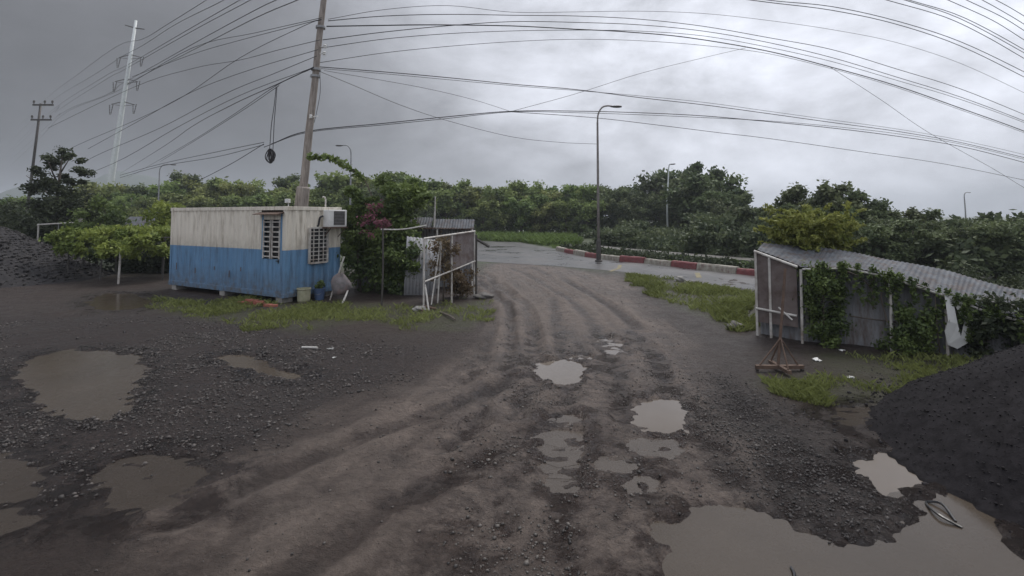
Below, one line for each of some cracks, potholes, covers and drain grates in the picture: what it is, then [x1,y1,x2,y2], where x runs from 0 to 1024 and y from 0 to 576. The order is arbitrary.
pothole [602,346,633,355]
pothole [527,353,596,387]
pothole [617,469,671,495]
pothole [592,334,630,348]
pothole [525,424,595,448]
pothole [531,466,593,497]
pothole [625,395,698,437]
pothole [622,434,689,460]
pothole [523,438,600,468]
pothole [537,406,591,431]
pothole [583,447,647,476]
pothole [528,456,584,479]
